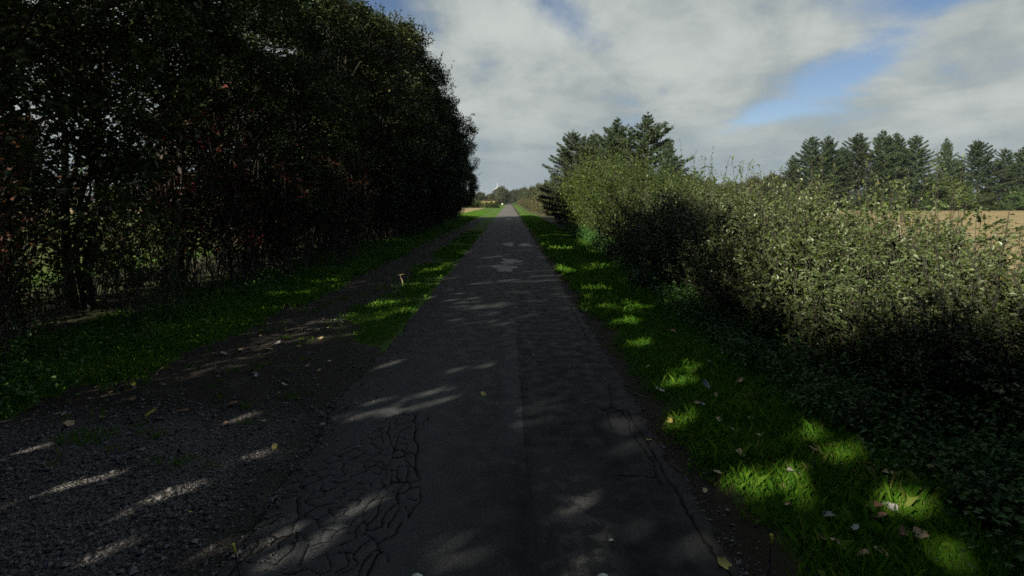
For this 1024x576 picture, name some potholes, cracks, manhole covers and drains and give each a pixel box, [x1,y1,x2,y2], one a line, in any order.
crack [217,413,429,576]
crack [602,386,732,576]
